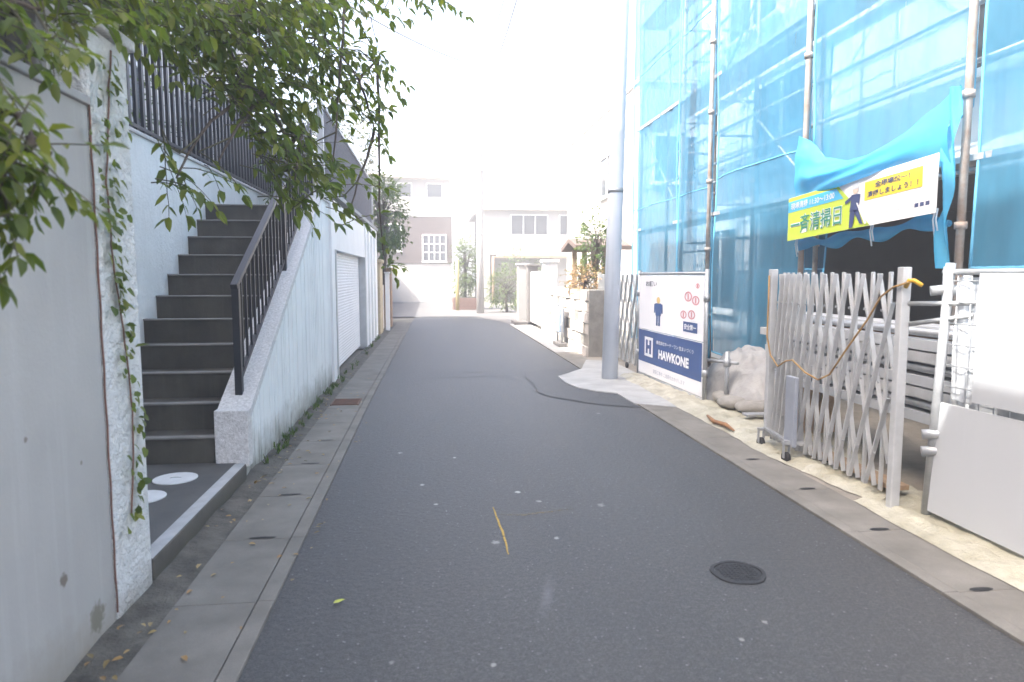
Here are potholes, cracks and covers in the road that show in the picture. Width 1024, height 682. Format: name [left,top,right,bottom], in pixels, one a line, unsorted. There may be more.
manhole cover [710,560,766,585]
drain grate [330,398,362,406]
